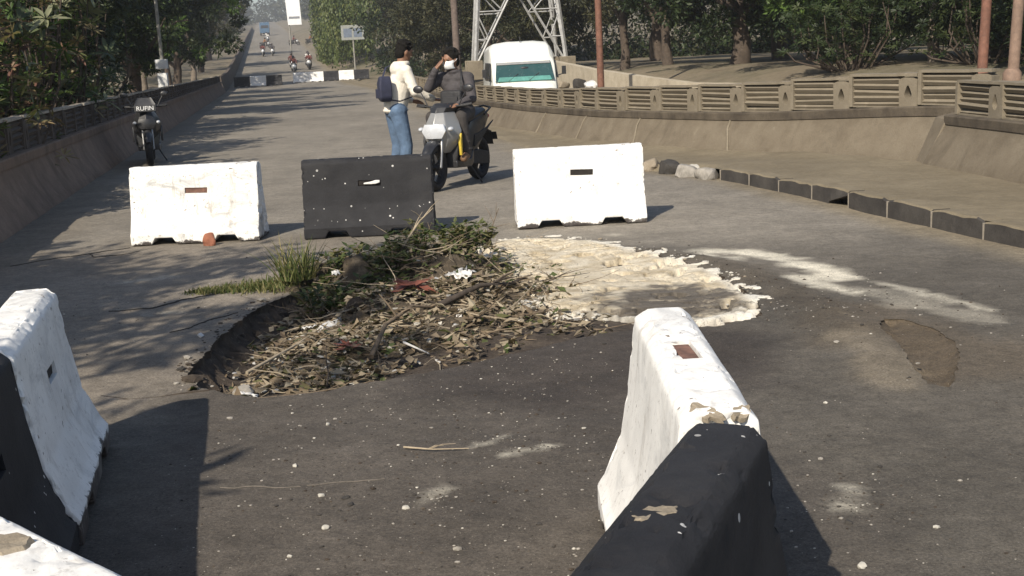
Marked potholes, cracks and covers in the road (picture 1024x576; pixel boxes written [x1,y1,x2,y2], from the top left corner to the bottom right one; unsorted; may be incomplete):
pothole [188,246,762,398]
pothole [879,319,960,387]
crack [109,292,238,333]
